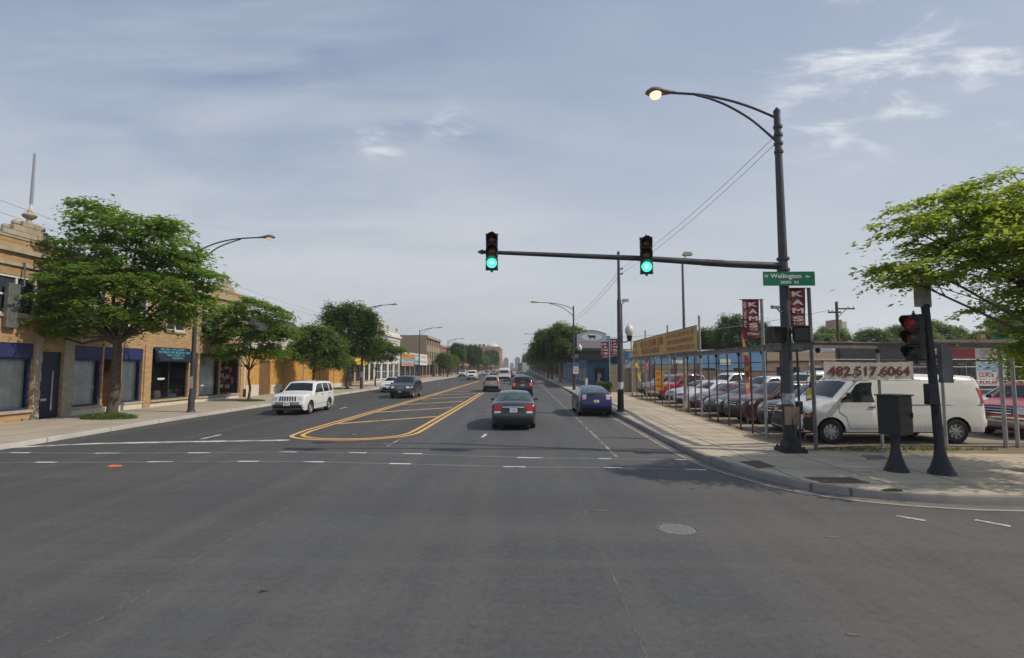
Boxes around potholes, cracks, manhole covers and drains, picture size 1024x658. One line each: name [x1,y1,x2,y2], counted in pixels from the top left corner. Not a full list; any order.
manhole cover [655,522,700,536]
utility cover [739,460,776,468]
